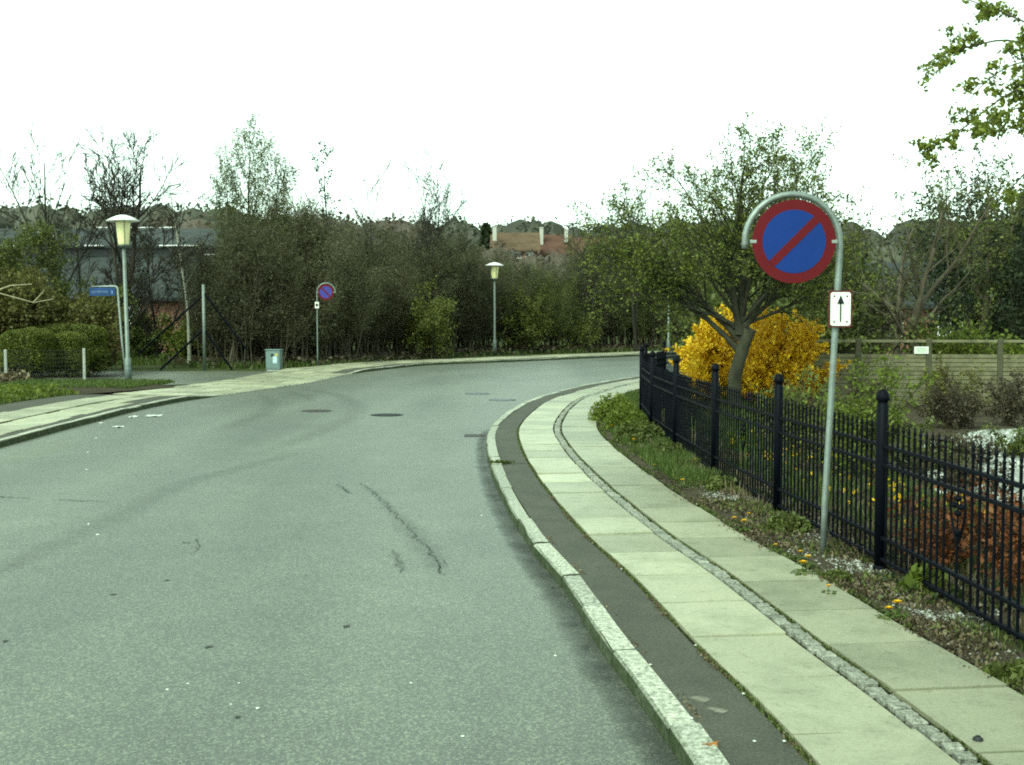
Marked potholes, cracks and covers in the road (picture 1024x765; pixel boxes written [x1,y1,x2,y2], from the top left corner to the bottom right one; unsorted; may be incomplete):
crack [336,484,446,575]
